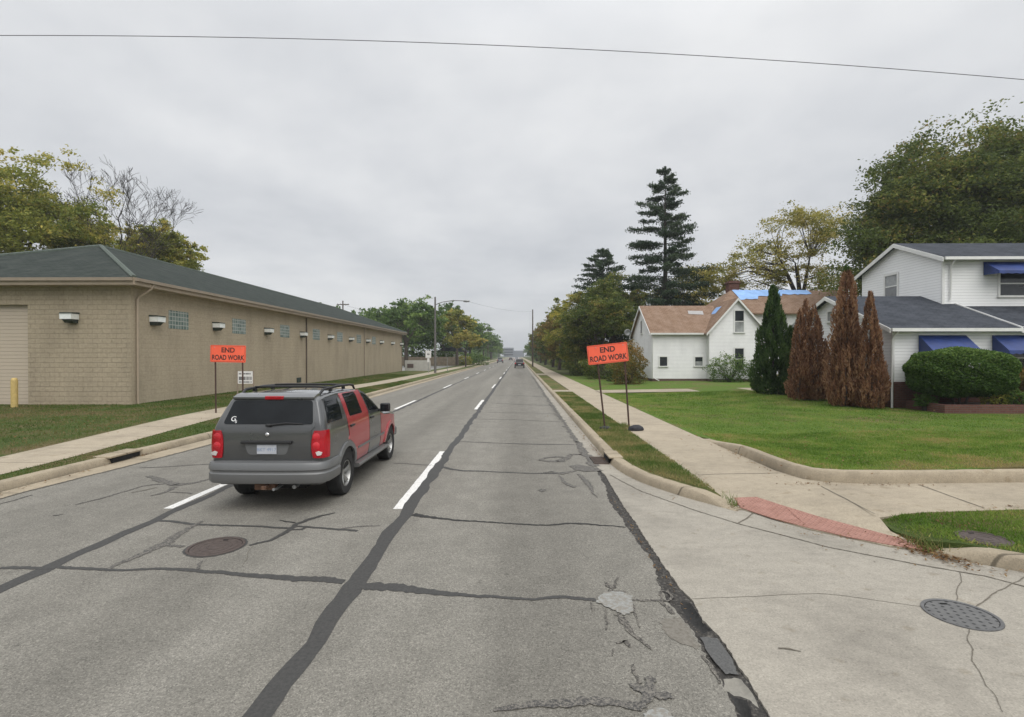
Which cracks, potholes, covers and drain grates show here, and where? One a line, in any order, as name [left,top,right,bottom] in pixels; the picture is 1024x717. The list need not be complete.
manhole cover [185,537,246,557]
crack [590,577,674,697]
crack [967,629,1003,712]
drain grate [93,449,143,463]
crack [78,464,203,504]
drain grate [589,451,623,464]
manhole cover [920,598,1005,632]
manhole cover [955,530,1015,547]
crack [0,512,381,584]
